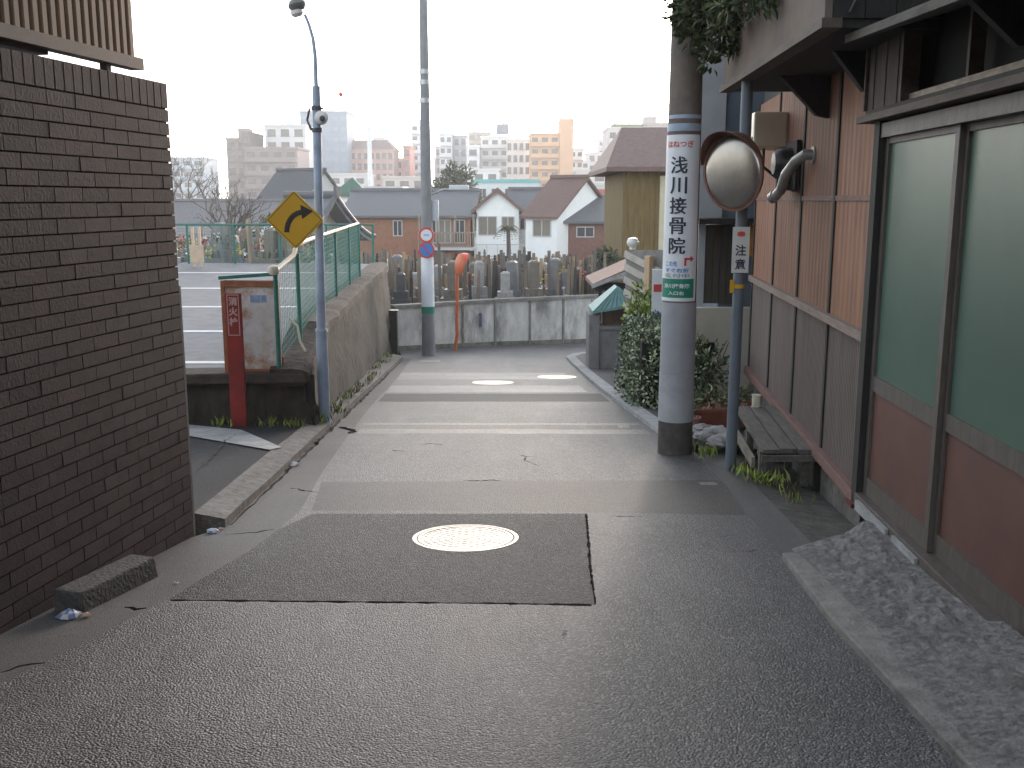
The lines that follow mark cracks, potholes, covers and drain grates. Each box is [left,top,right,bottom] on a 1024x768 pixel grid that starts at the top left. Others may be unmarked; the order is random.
manhole cover [412,524,518,552]
crack [0,663,42,673]
crack [192,435,236,474]
